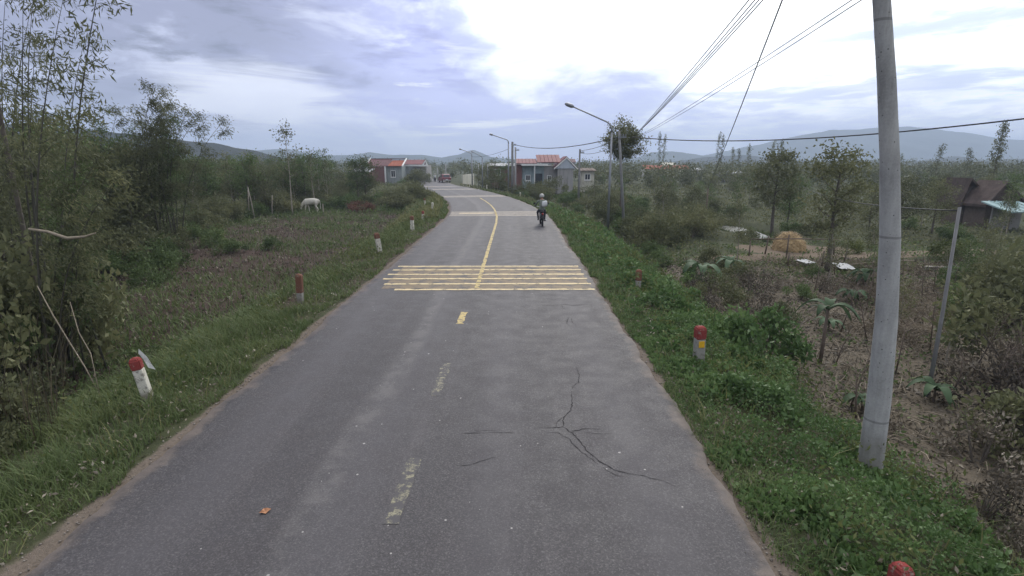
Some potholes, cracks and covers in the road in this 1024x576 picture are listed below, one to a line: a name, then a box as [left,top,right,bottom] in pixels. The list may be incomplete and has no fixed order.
crack [544,373,674,486]
